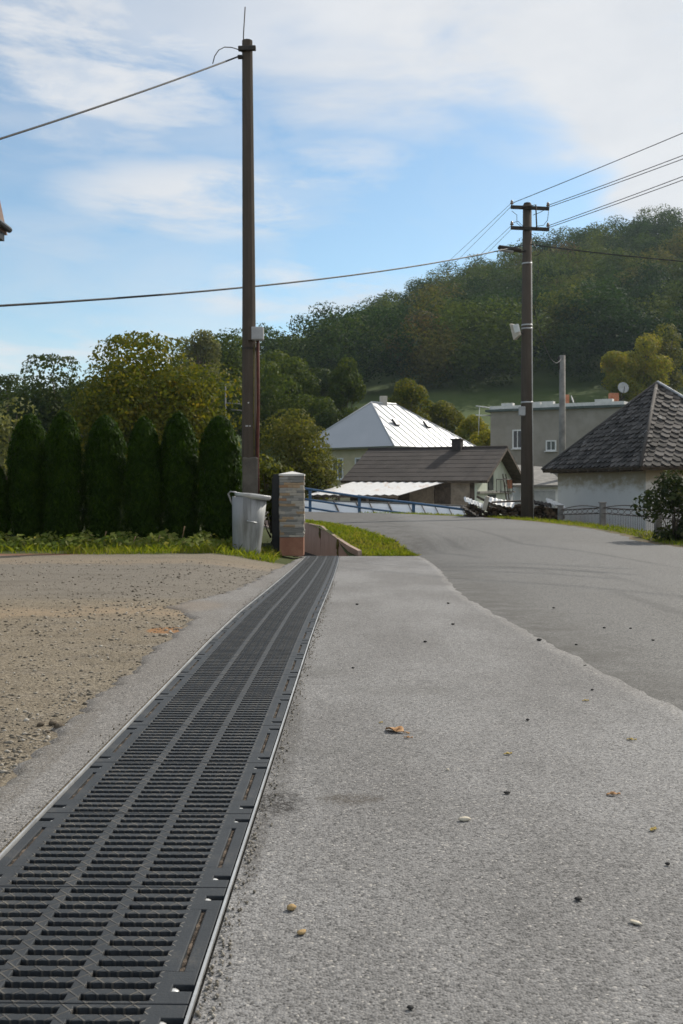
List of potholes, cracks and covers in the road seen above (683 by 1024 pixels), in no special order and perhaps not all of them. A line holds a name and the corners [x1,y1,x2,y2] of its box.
drain grate [46,762,268,816]
drain grate [130,697,290,727]
drain grate [0,813,251,889]
drain grate [157,674,297,697]
drain grate [211,630,312,642]
drain grate [0,887,227,1009]
drain grate [0,1003,188,1024]
drain grate [95,725,280,764]
drain grate [197,641,308,657]
drain grate [233,612,319,620]
drain grate [179,656,303,675]
drain grate [222,620,316,630]
